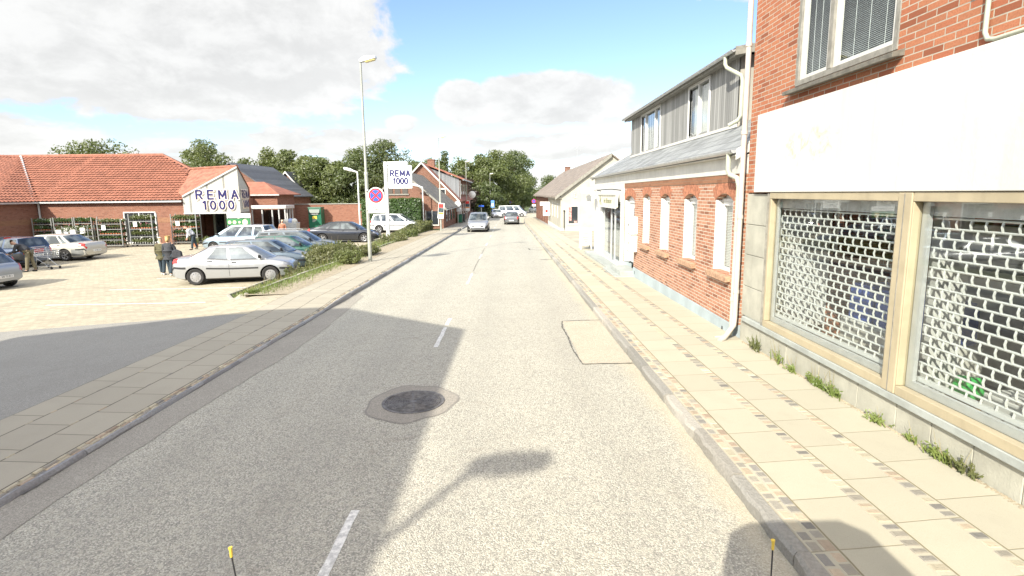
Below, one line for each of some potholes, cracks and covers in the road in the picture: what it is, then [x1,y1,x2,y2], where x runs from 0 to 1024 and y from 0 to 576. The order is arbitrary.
manhole cover [364,385,460,424]
